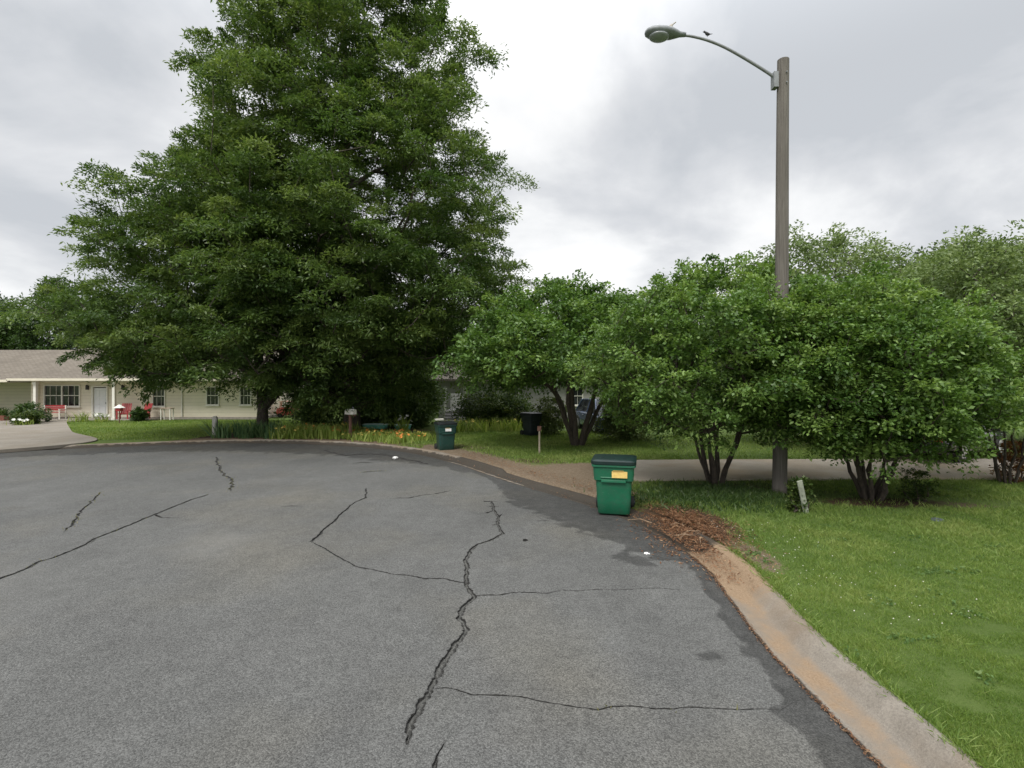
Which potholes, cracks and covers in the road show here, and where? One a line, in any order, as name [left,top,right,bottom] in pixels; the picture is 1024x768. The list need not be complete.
crack [0,493,206,579]
crack [310,450,777,768]
crack [215,457,234,490]
